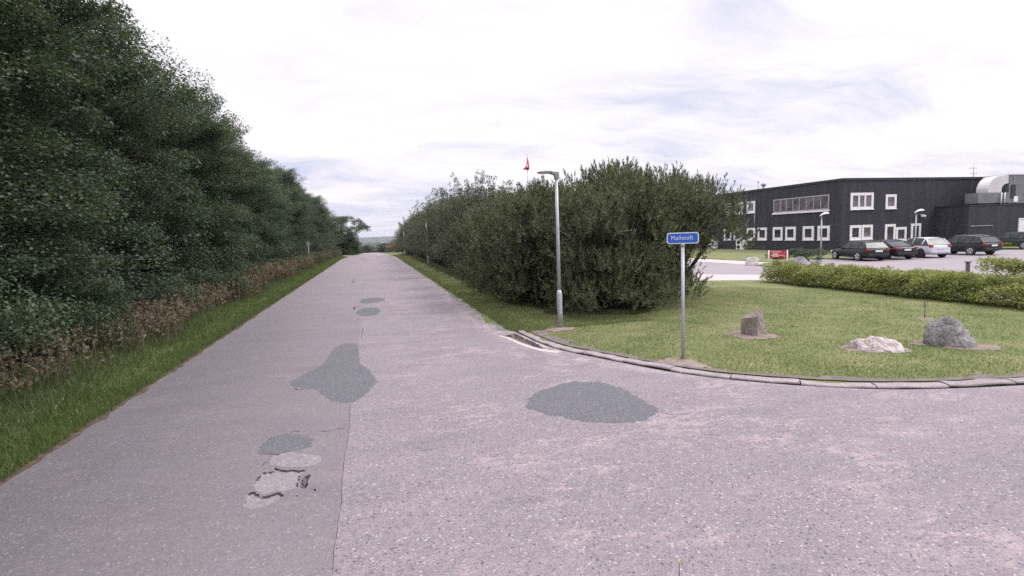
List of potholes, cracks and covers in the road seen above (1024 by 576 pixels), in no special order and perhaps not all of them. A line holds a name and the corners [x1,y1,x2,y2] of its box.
pothole [243,492,284,509]
pothole [254,467,306,494]
